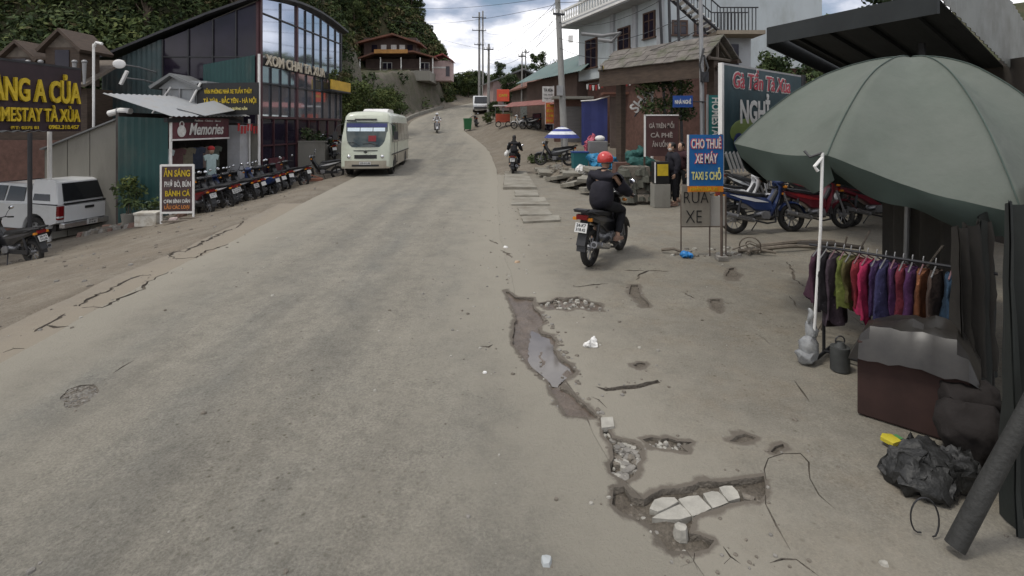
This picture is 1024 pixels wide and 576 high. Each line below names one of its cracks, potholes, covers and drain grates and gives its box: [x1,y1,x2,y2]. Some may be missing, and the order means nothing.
pothole [506,291,605,420]
pothole [612,476,766,558]
crack [764,453,836,576]
crack [5,221,244,352]
pothole [643,437,692,452]
crack [786,262,805,307]
pothole [730,433,785,454]
pothole [629,285,649,307]
crack [593,380,660,421]
pothole [603,430,642,486]
pothole [726,268,741,280]
pothole [710,299,722,313]
